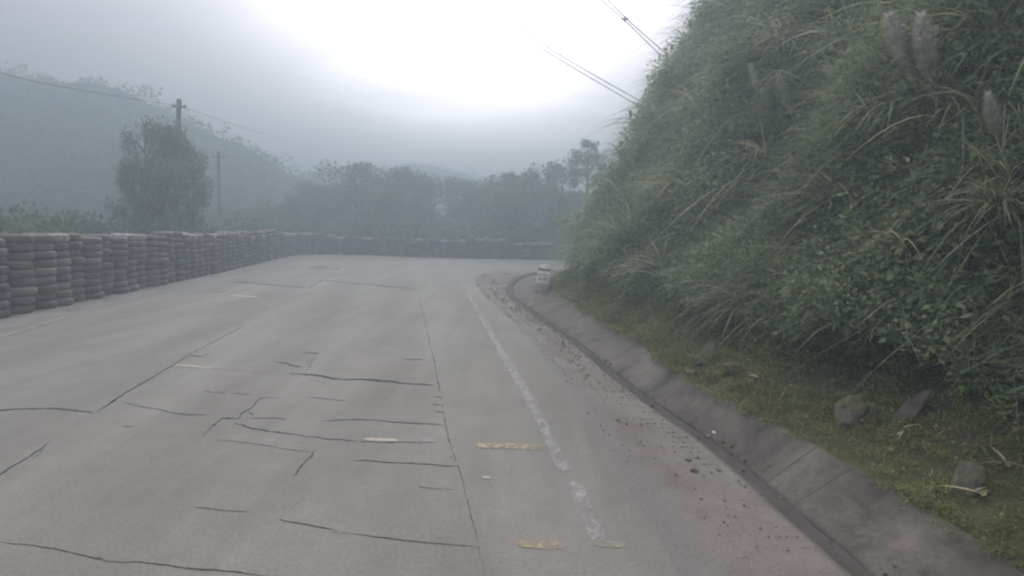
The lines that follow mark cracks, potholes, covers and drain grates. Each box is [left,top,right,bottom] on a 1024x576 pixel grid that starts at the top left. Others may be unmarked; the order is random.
crack [0,297,486,576]
